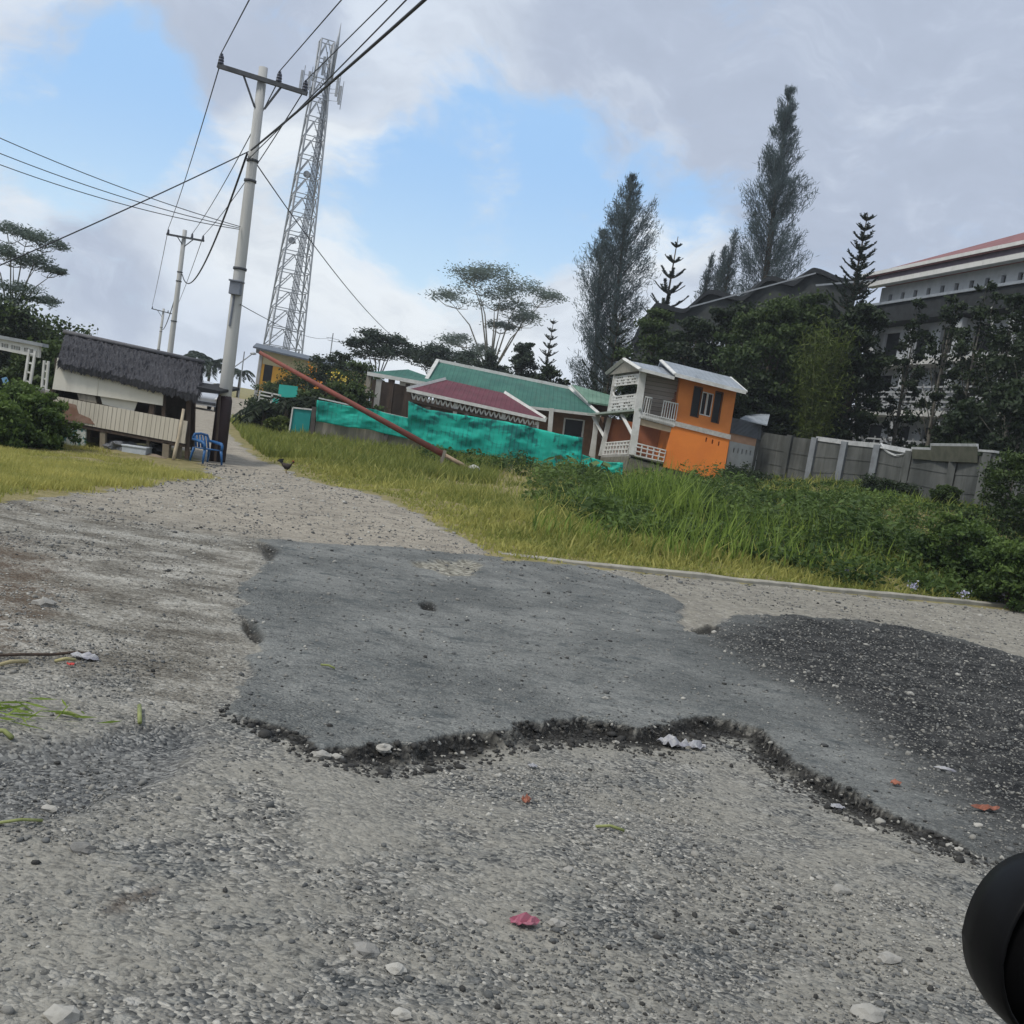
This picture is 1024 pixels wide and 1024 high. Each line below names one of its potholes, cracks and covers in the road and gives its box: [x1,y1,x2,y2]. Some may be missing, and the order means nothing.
pothole [248,539,286,562]
pothole [415,600,440,612]
pothole [236,611,269,647]
pothole [688,623,724,636]
